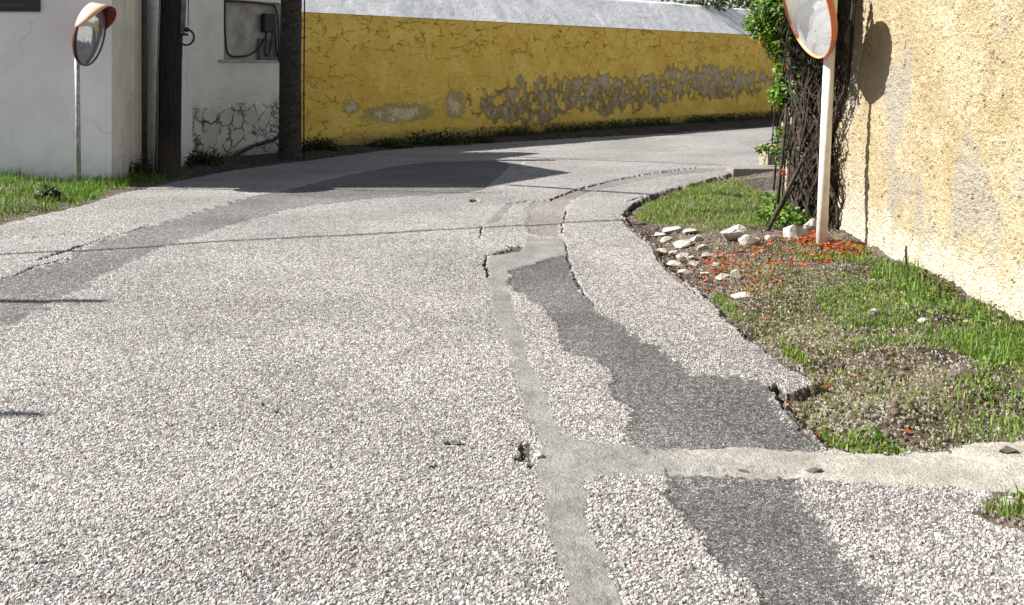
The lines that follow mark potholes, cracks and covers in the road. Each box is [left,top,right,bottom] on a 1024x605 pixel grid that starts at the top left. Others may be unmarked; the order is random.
crack [478,226,491,279]
pothole [514,441,534,470]
crack [561,211,596,306]
